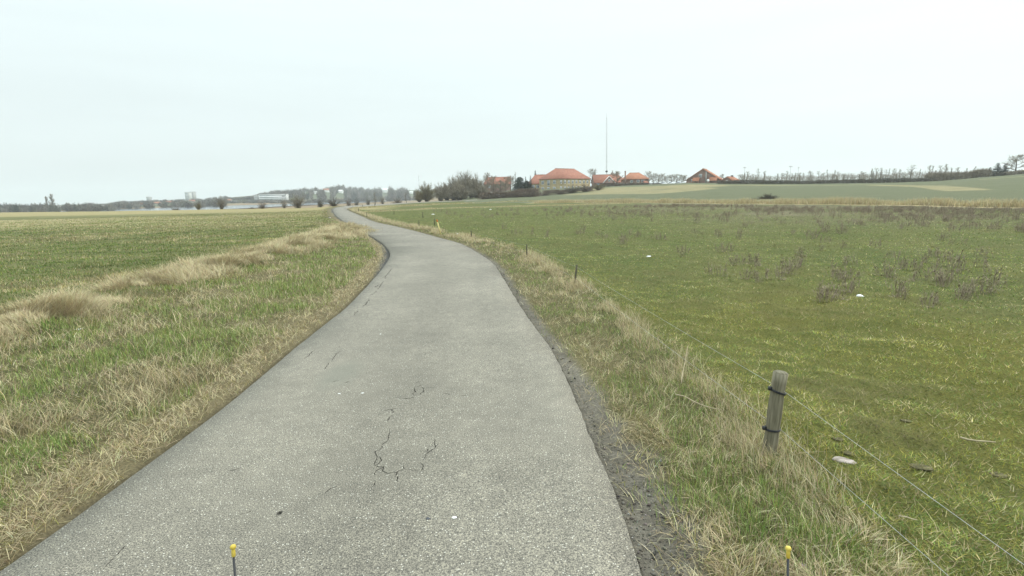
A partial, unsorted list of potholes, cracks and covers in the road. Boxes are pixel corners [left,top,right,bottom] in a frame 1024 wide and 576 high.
crack [371,382,467,490]
